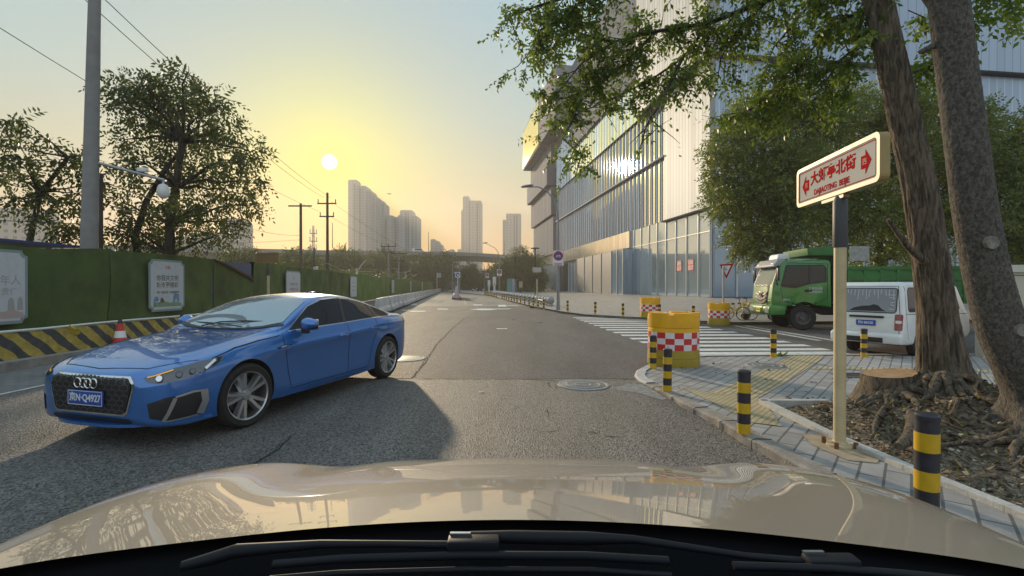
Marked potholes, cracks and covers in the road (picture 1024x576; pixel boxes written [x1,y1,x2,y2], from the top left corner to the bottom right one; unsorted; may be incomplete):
manhole cover [557,379,609,391]
crack [253,432,298,464]
